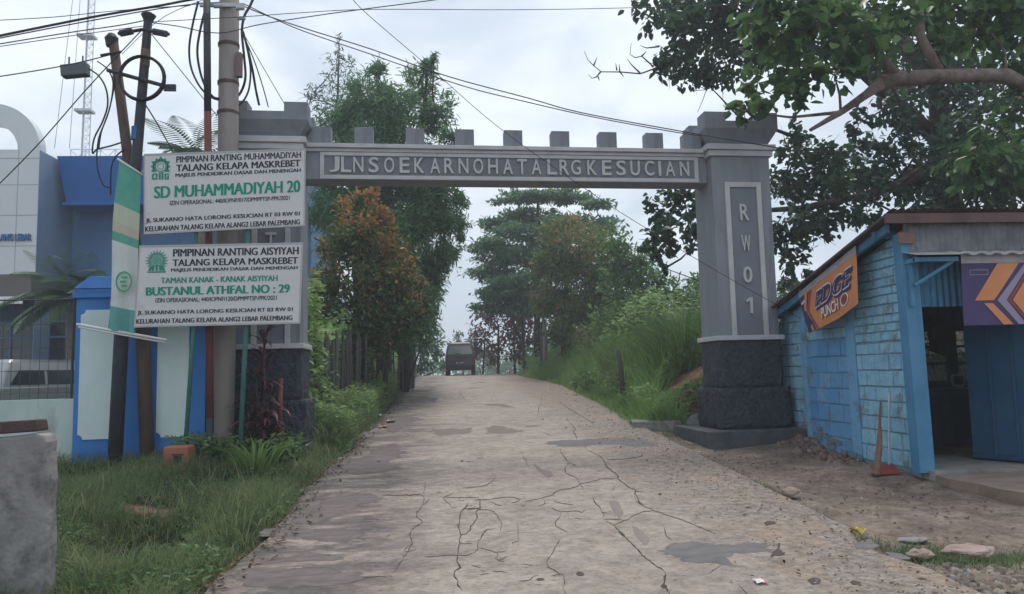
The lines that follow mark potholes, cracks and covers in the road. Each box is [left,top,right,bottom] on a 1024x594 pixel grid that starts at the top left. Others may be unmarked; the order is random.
crack [364,419,713,594]
